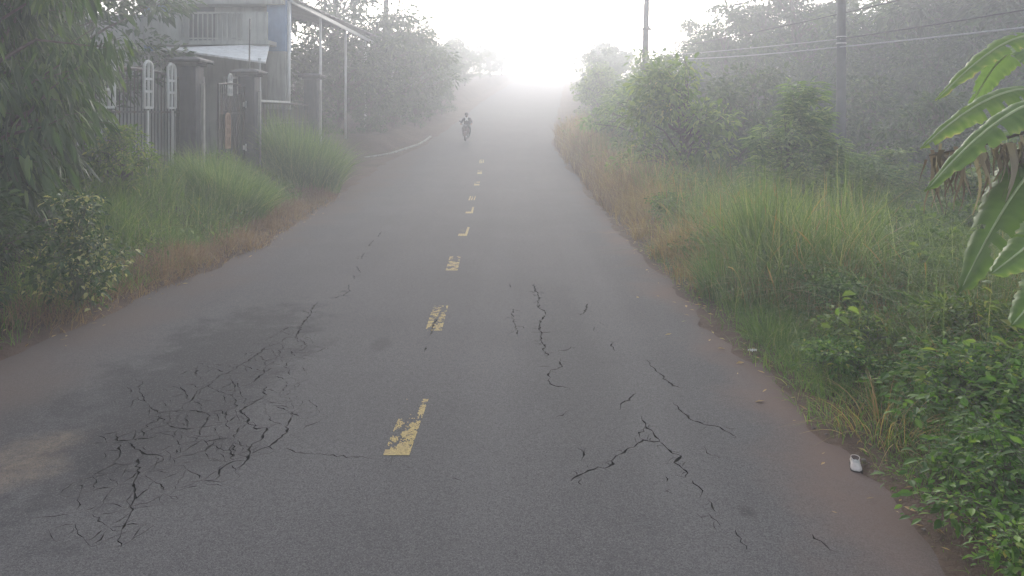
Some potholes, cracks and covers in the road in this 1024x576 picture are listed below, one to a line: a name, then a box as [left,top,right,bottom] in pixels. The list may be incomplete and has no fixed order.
crack [49,302,363,554]
crack [506,285,571,391]
crack [571,360,747,549]
